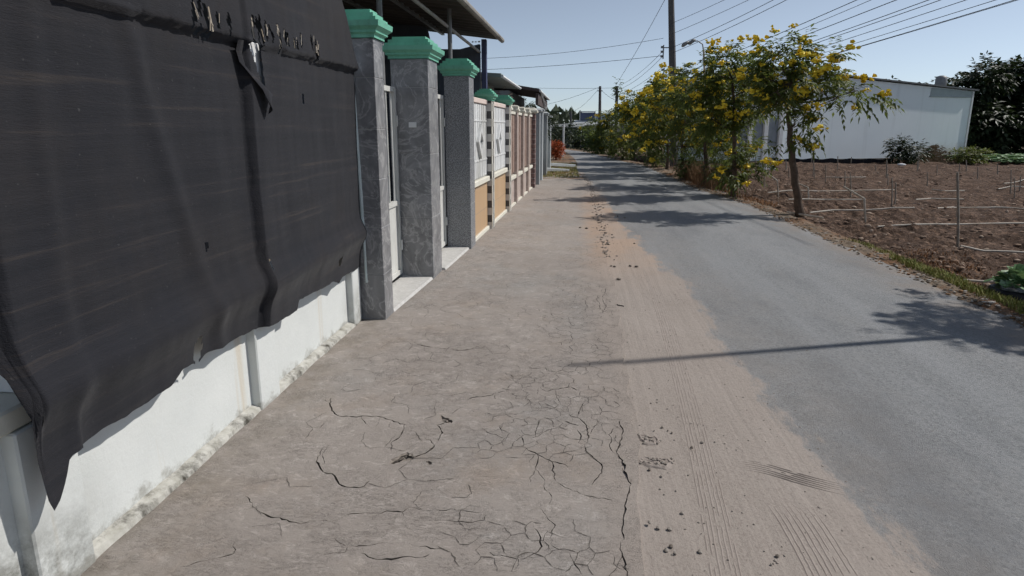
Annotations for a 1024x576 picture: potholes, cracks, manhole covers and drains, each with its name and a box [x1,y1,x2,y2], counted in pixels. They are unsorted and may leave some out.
crack [230,247,631,576]
